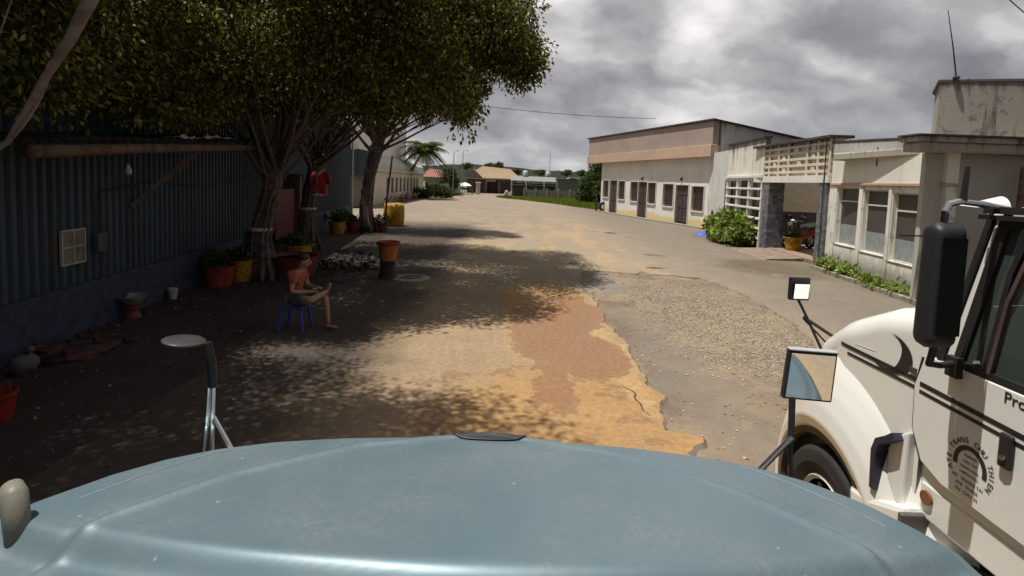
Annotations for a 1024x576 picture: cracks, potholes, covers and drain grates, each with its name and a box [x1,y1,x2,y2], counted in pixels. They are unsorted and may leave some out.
manhole cover [392,274,431,282]
crack [621,384,651,416]
